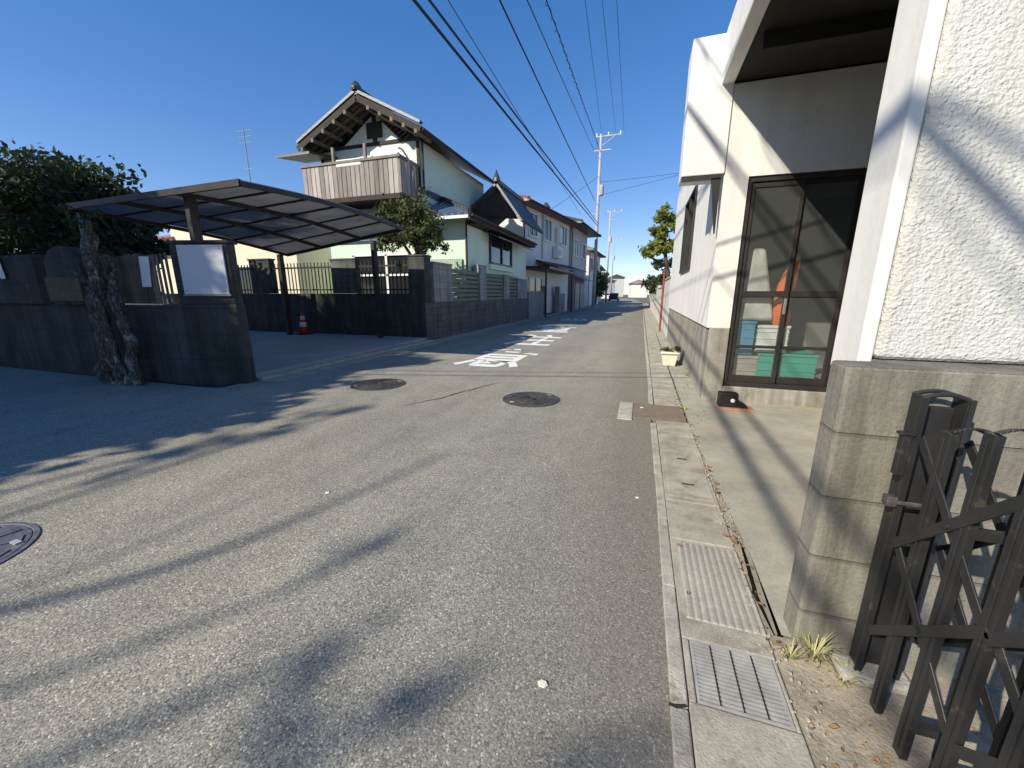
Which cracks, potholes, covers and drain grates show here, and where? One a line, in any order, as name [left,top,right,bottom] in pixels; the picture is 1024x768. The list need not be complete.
manhole cover [0,522,40,564]
drain grate [689,639,796,732]
manhole cover [350,378,406,391]
utility cover [617,402,687,423]
manhole cover [503,392,560,407]
